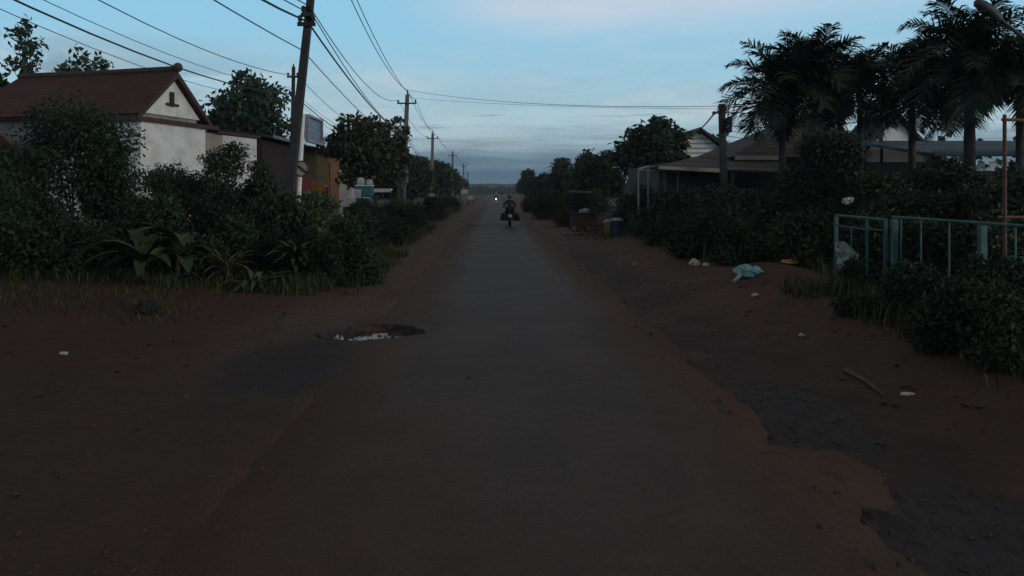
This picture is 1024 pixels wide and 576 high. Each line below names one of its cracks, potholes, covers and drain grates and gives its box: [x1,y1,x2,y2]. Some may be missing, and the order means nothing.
pothole [315,328,417,341]
